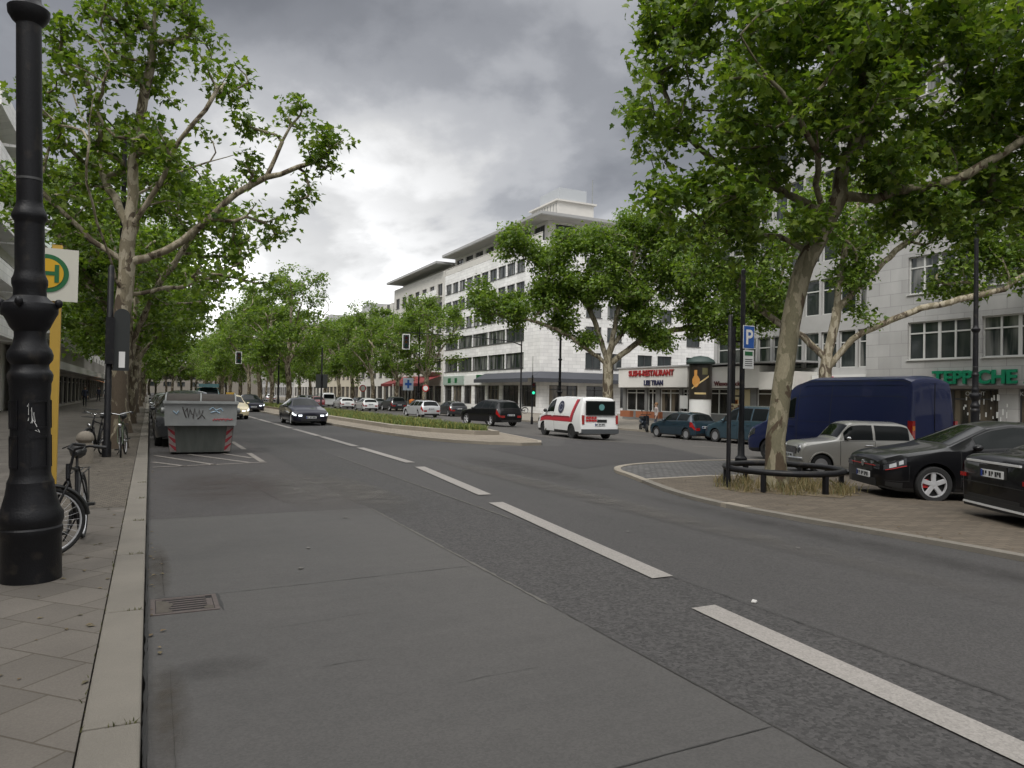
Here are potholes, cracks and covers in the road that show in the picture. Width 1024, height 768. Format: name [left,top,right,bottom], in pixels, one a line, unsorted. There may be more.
drain grate [149,593,224,617]
